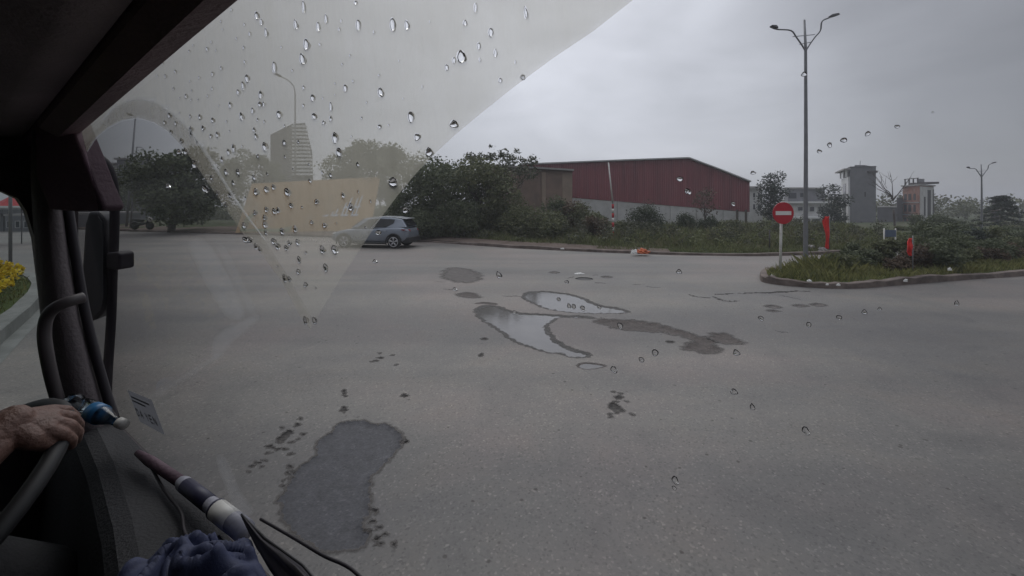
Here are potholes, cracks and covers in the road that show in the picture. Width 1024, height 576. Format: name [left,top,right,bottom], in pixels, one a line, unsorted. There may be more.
pothole [521,291,629,314]
pothole [264,417,306,455]
crack [689,290,809,302]
pothole [608,391,635,418]
pothole [474,305,595,358]
